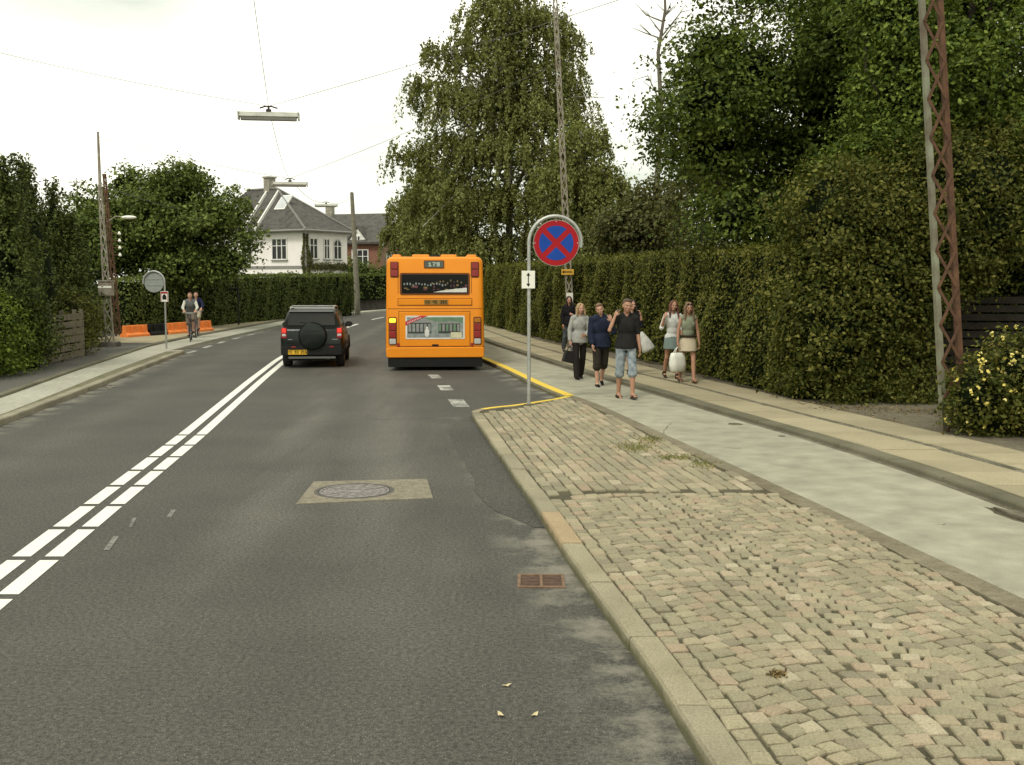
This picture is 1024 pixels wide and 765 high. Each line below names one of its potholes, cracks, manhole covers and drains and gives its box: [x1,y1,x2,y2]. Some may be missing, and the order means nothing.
drain grate [517,574,566,588]
manhole cover [296,479,433,504]
